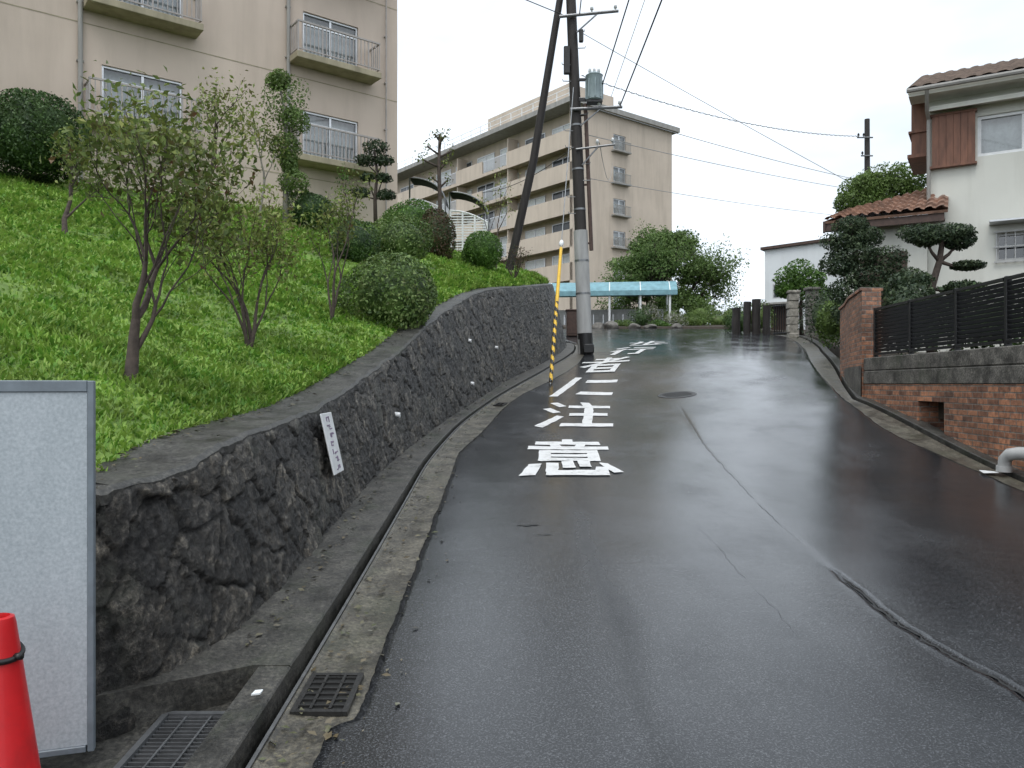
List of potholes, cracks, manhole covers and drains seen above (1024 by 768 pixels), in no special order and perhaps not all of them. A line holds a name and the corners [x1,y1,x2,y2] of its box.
crack [842,578,1024,697]
drain grate [290,673,364,716]
drain grate [113,711,225,768]
